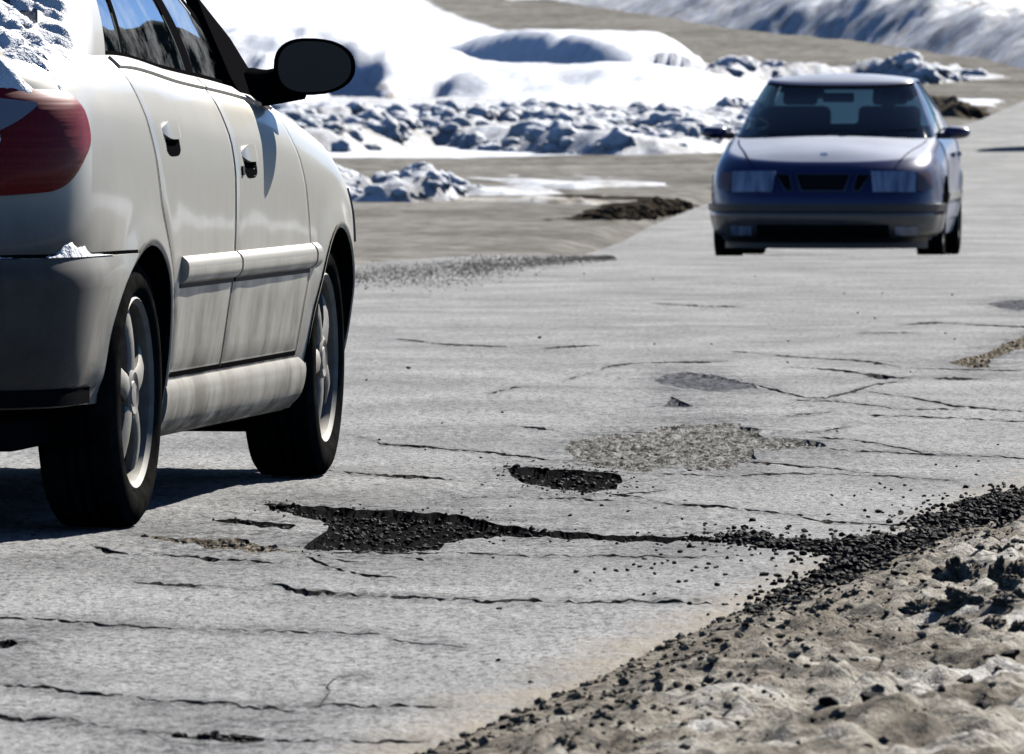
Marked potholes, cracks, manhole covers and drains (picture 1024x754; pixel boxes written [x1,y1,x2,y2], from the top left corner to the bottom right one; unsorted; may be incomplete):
crack [133,550,720,605]
pothole [484,463,655,501]
crack [0,714,431,744]
crack [95,547,273,564]
crack [399,339,507,347]
pothole [254,500,710,556]
crack [874,322,1024,333]
pothole [663,396,691,407]
crack [3,675,446,712]
crack [0,616,465,648]
crack [327,345,1024,527]
